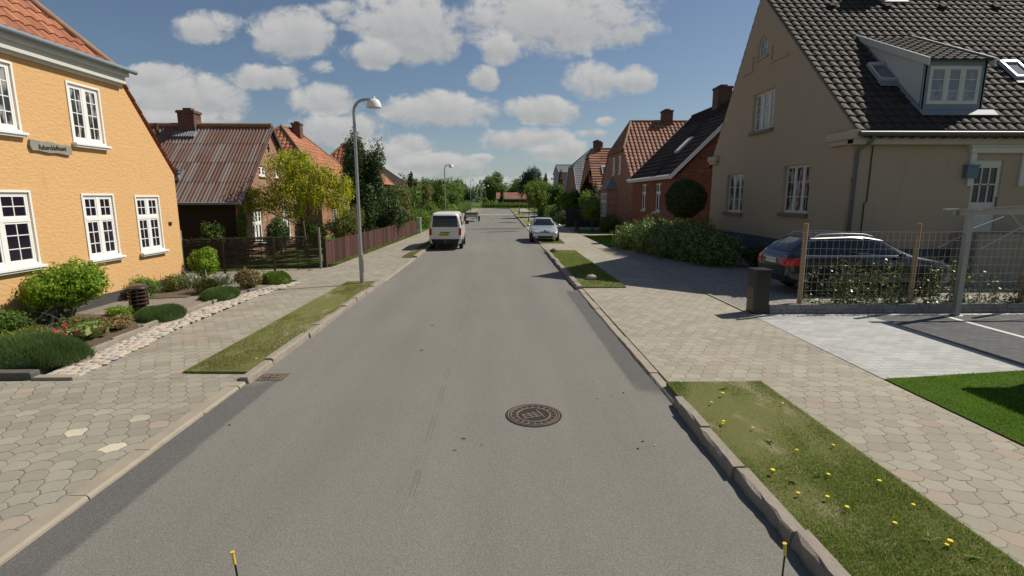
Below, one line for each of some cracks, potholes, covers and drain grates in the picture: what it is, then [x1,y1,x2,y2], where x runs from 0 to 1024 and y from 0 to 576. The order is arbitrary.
drain grate [255,373,290,381]
manhole cover [505,404,562,427]
